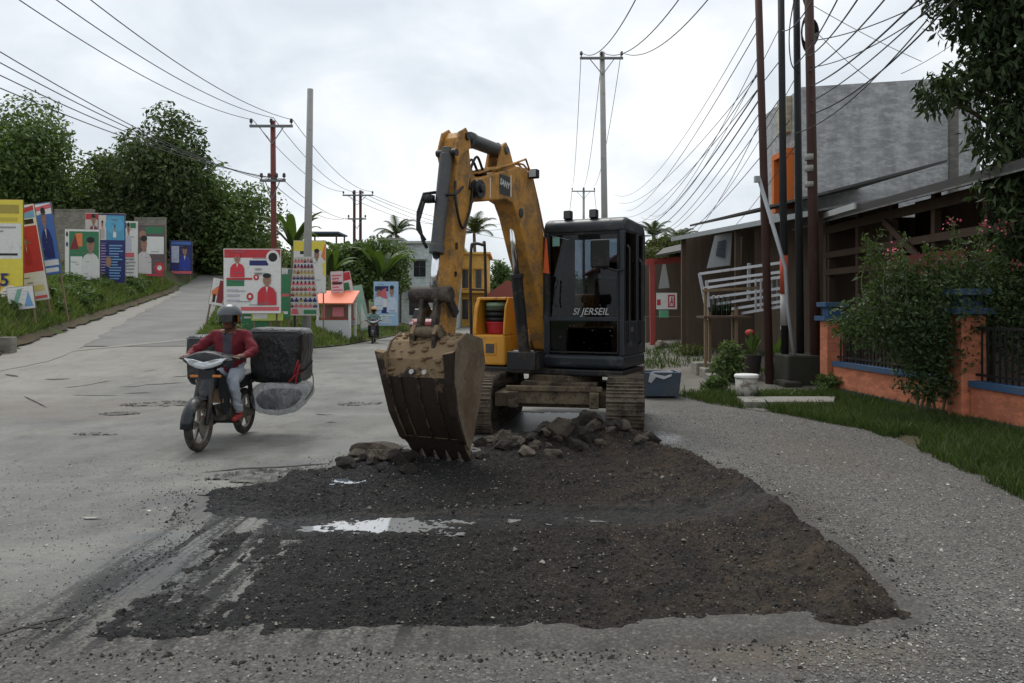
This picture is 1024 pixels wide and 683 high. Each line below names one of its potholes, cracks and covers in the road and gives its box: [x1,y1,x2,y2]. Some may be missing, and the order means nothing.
pothole [91,424,912,641]
crack [5,361,185,396]
